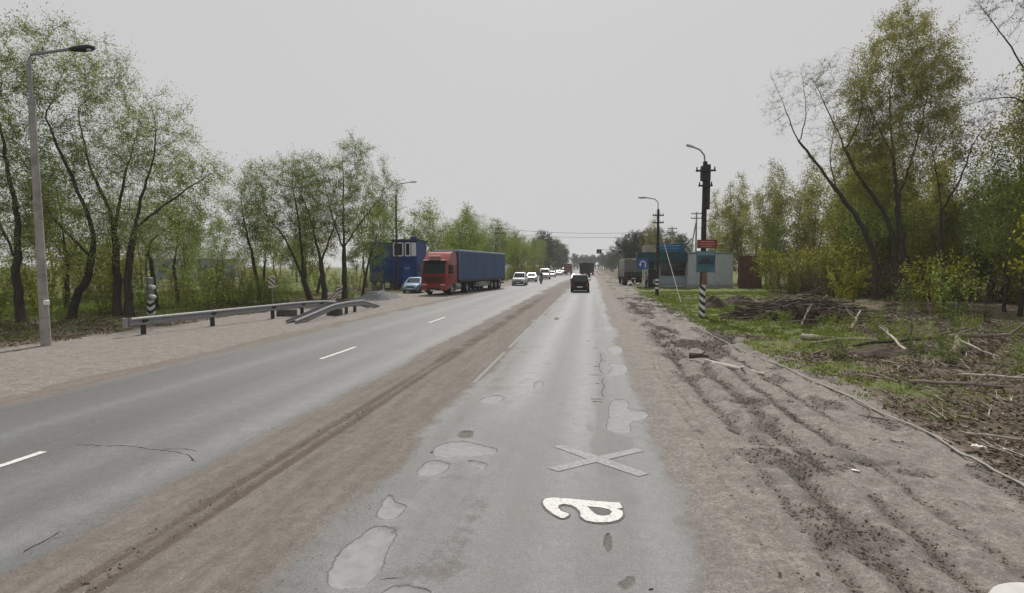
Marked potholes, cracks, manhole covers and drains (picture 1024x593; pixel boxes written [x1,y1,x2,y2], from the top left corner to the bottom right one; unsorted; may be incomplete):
pothole [603,533,613,552]
crack [23,531,63,553]
pothole [618,576,635,590]
crack [91,444,195,462]
